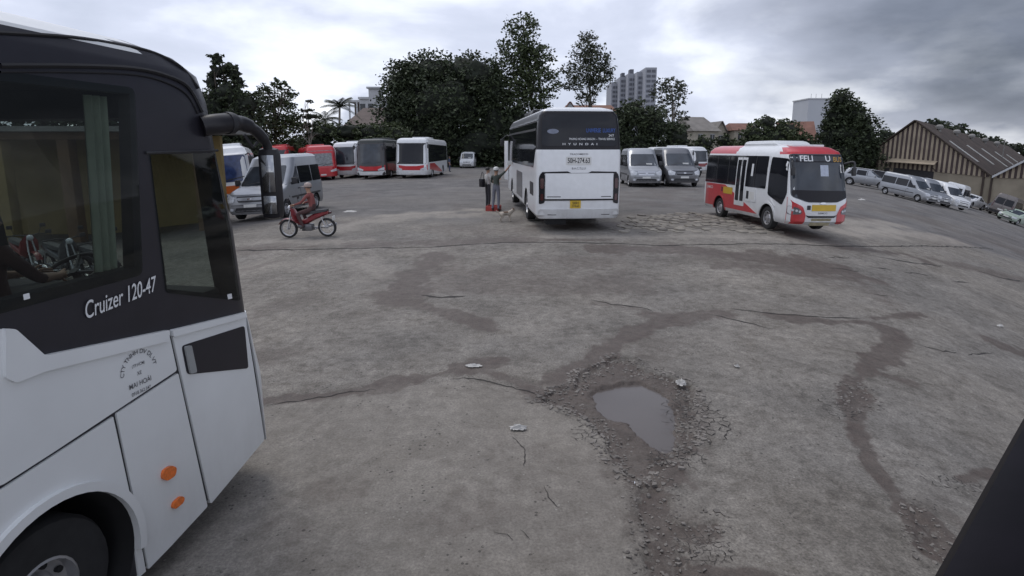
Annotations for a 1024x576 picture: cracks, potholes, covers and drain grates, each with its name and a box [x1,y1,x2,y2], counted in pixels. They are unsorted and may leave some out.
crack [239,242,1024,296]
crack [594,300,850,329]
crack [269,377,549,405]
pothole [525,352,710,488]
